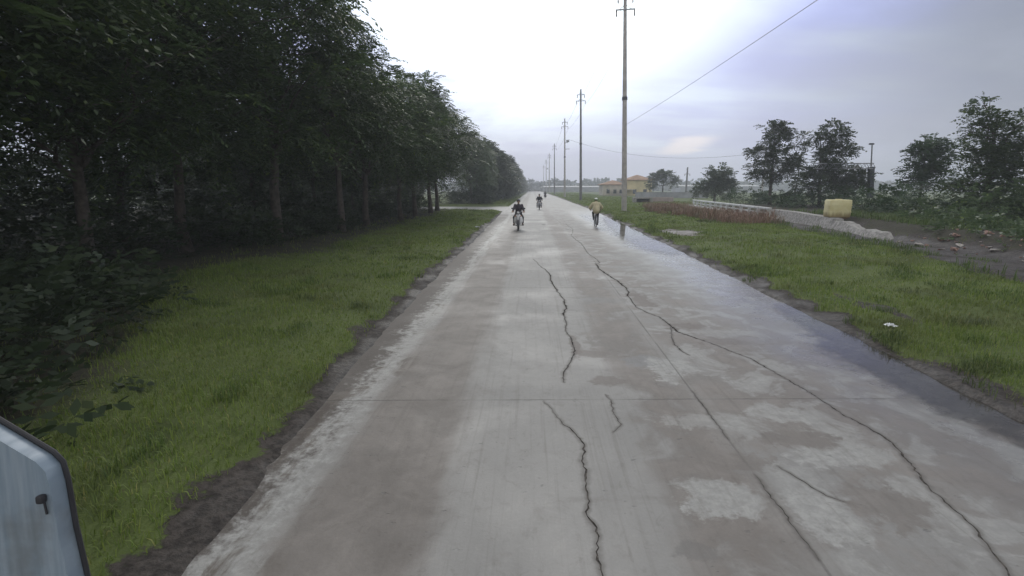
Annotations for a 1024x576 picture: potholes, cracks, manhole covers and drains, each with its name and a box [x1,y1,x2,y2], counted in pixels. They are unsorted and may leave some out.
crack [533,259,576,382]
crack [570,227,1010,576]
crack [545,403,604,576]
